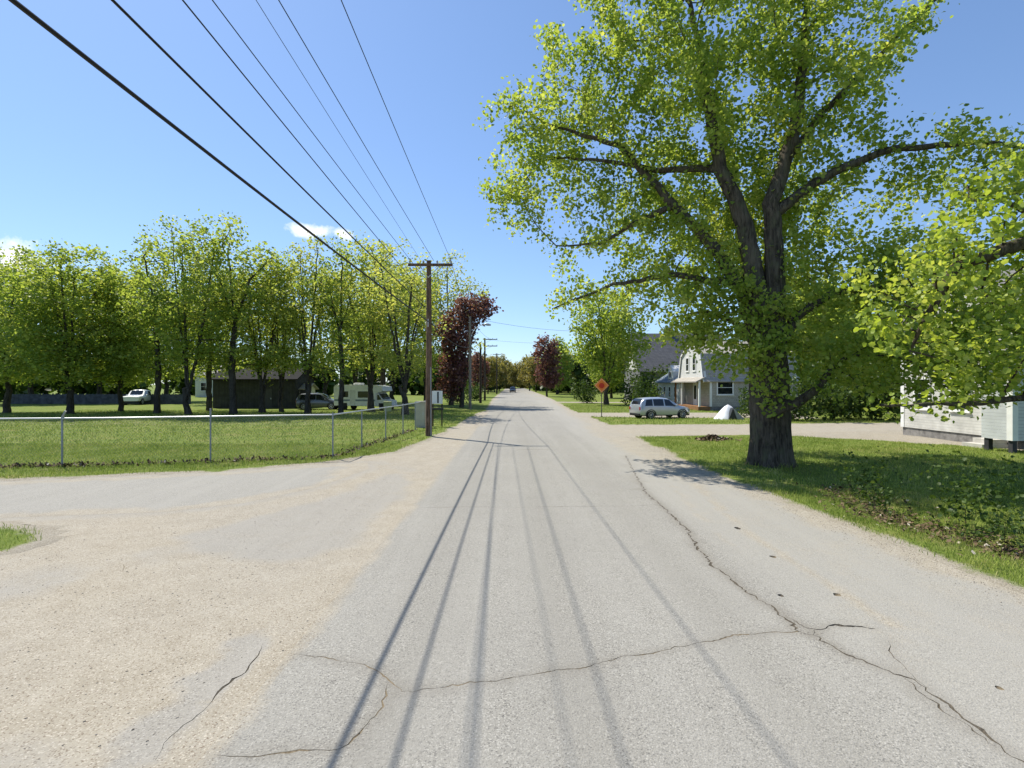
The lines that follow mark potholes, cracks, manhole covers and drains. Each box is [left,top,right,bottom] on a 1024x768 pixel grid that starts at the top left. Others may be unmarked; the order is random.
crack [155,644,263,760]
crack [221,456,1024,762]
